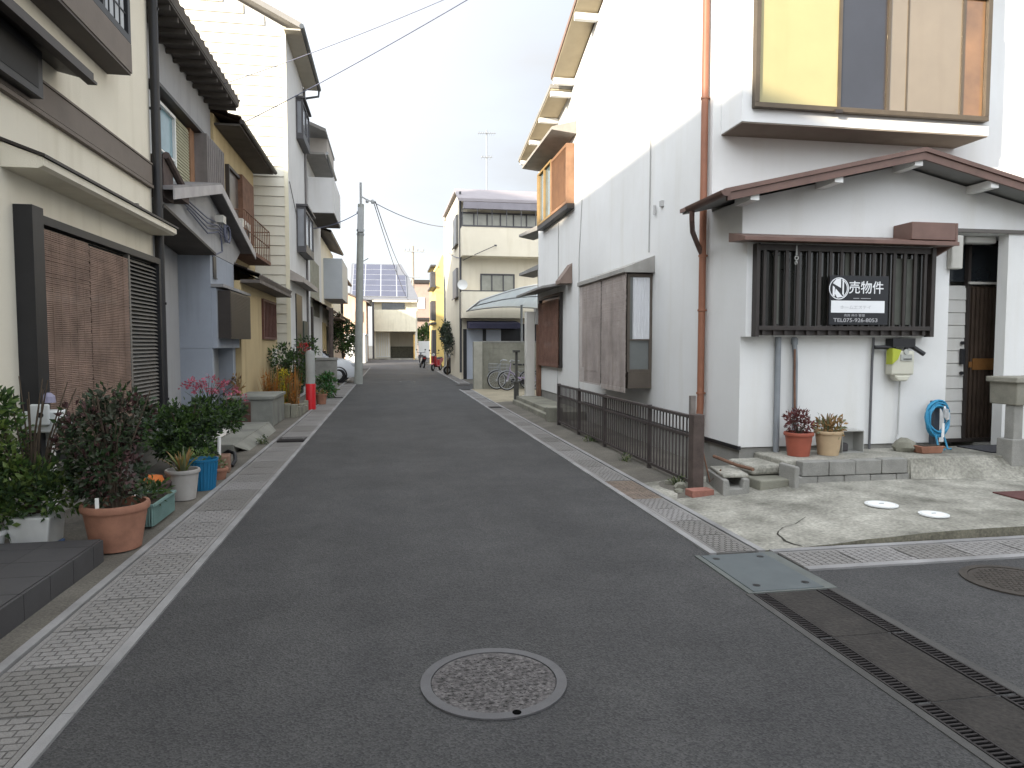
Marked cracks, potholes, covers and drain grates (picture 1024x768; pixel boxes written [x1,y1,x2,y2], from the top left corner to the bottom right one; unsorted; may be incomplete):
utility cover [918,510,950,518]
manhole cover [420,648,567,721]
manhole cover [959,565,1024,596]
utility cover [864,500,899,509]
